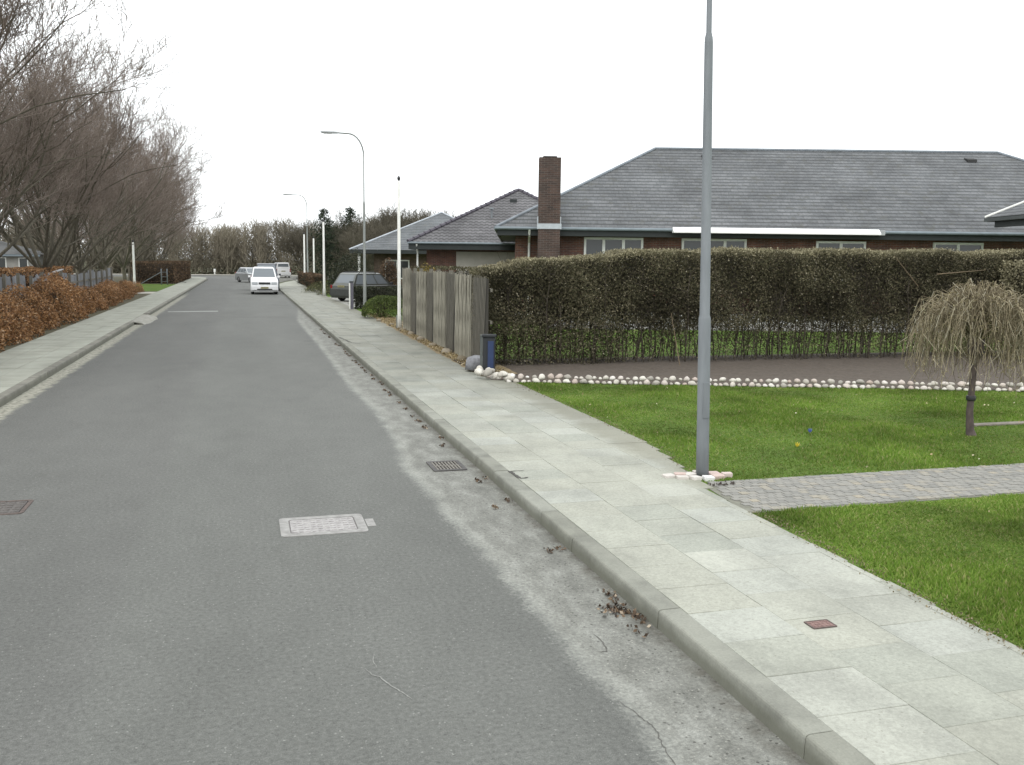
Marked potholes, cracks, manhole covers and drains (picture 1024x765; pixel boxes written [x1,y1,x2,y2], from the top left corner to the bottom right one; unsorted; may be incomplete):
drain grate [426,460,467,472]
manhole cover [0,499,34,515]
crack [366,656,412,699]
utility cover [804,619,837,630]
crack [618,700,676,765]
manhole cover [279,514,376,537]
